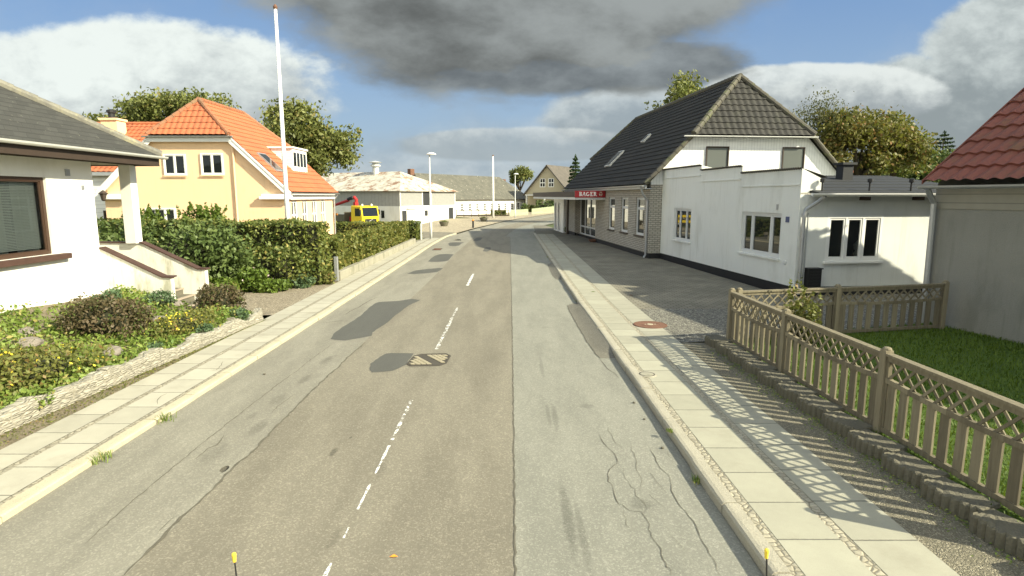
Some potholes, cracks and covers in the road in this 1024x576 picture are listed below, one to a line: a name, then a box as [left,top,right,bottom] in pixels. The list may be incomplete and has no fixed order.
manhole cover [633,321,667,329]
crack [600,425,720,575]
